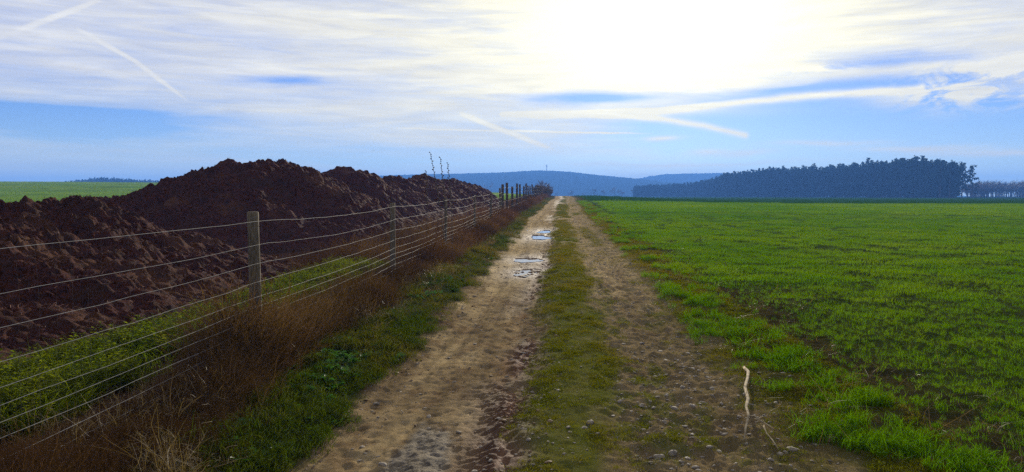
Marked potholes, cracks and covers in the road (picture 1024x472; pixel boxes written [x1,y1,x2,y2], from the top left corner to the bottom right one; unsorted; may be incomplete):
pothole [512,268,545,278]
